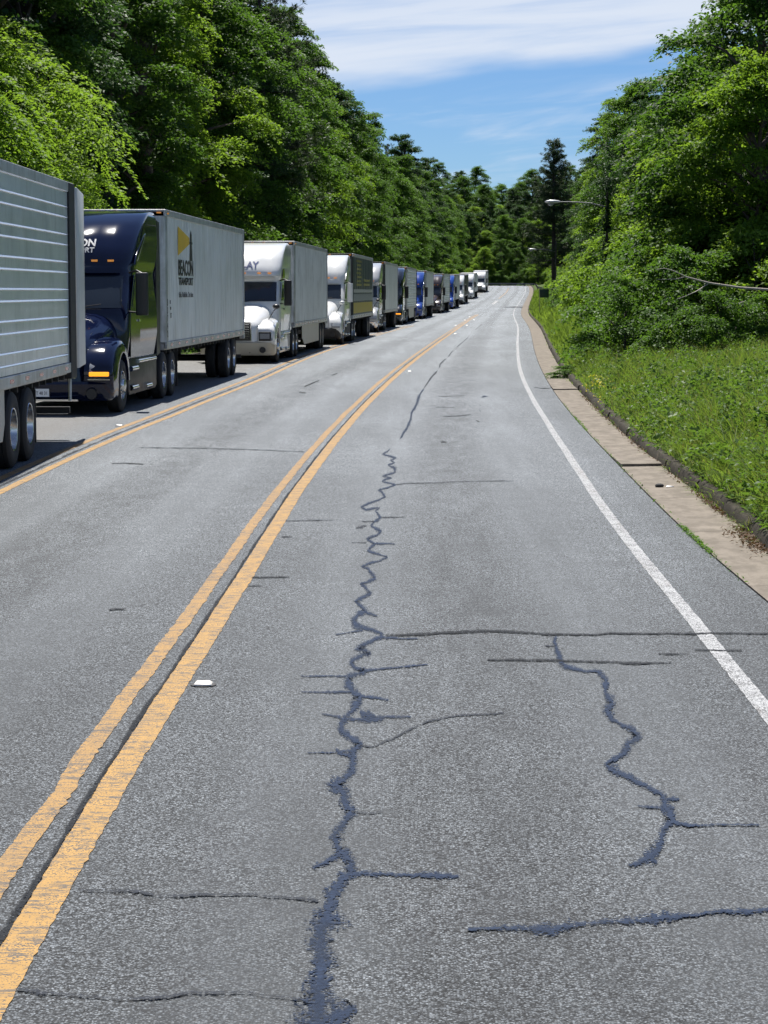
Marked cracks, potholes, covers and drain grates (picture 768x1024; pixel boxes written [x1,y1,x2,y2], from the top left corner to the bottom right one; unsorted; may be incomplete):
crack [385,629,766,665]
crack [17,987,300,999]
crack [468,907,768,936]
crack [81,888,318,902]
crack [120,447,304,464]
